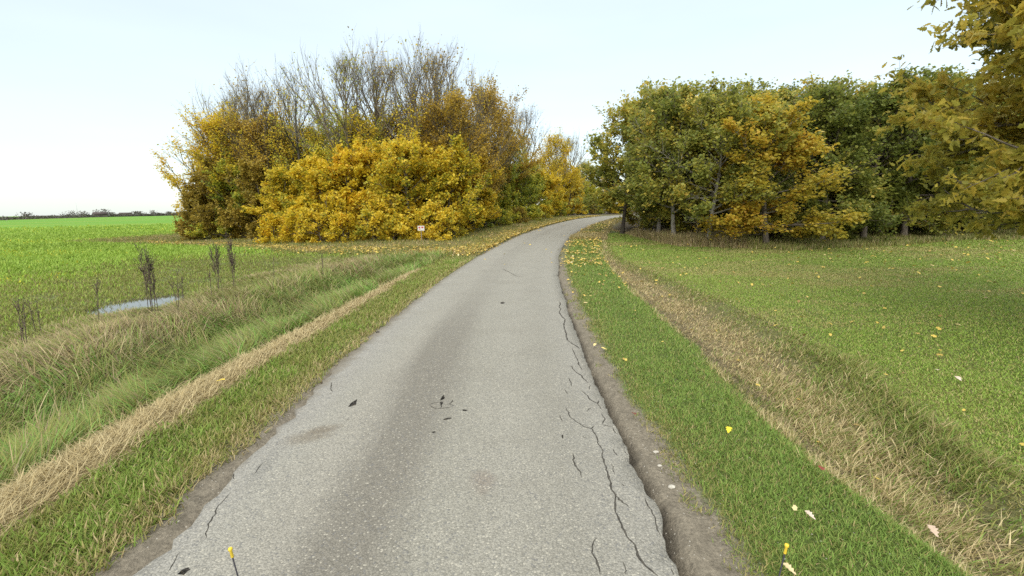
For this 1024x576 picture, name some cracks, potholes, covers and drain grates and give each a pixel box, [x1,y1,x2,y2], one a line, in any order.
crack [559,303,674,576]
crack [205,473,235,537]
